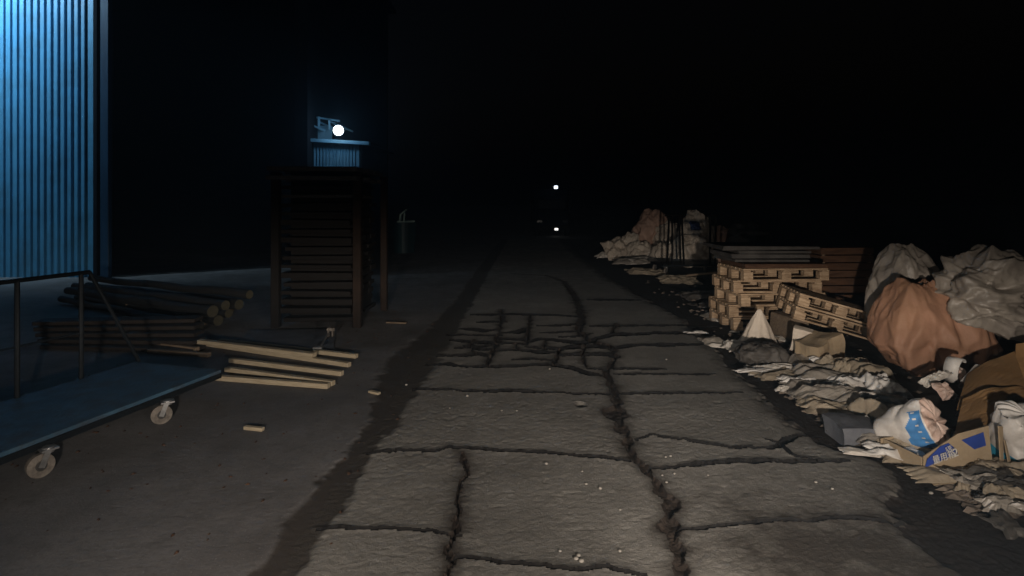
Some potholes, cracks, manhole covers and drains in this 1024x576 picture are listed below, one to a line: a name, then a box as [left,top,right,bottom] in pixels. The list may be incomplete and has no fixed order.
crack [315,274,906,576]
